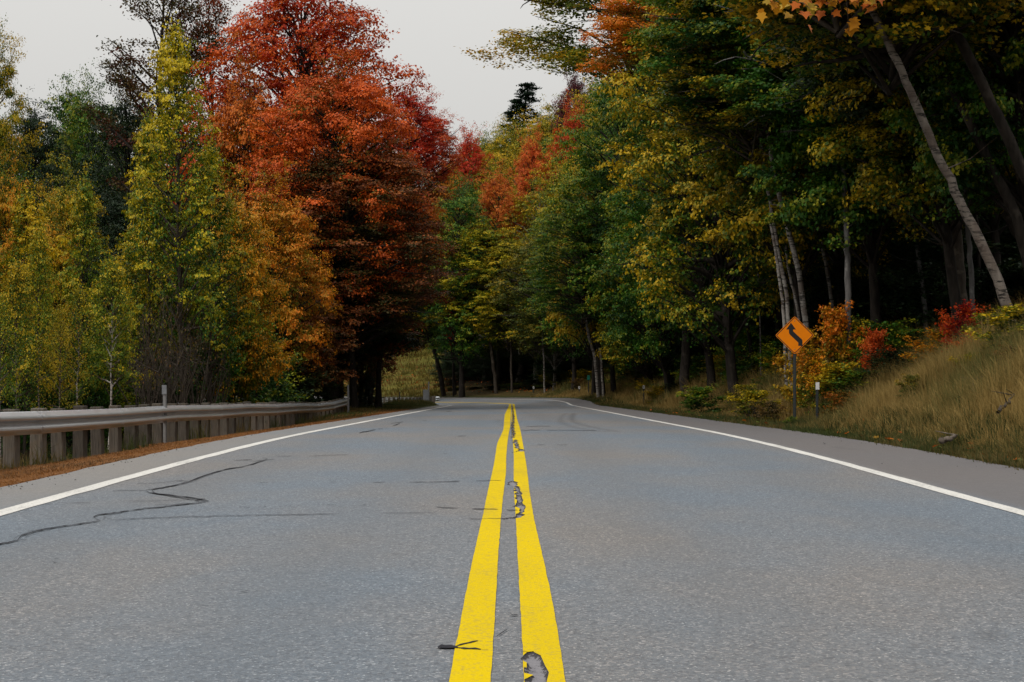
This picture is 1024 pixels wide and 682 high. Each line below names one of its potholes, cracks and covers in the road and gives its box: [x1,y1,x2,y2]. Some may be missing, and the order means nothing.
crack [0,458,508,555]
pothole [520,652,549,682]
crack [438,640,480,649]
